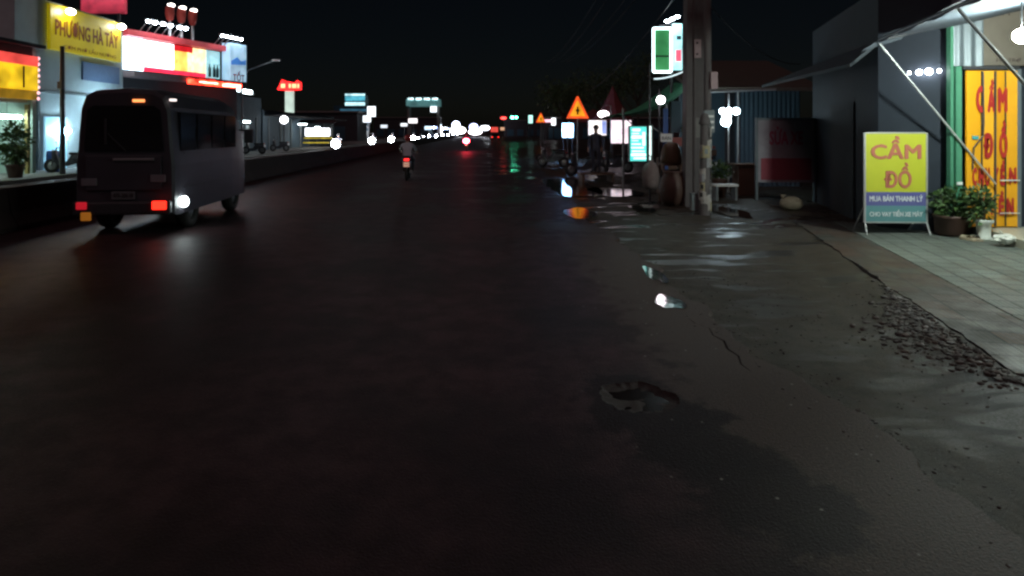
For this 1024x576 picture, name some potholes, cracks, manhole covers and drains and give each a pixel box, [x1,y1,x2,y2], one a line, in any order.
crack [691,320,750,371]
pothole [599,381,680,413]
